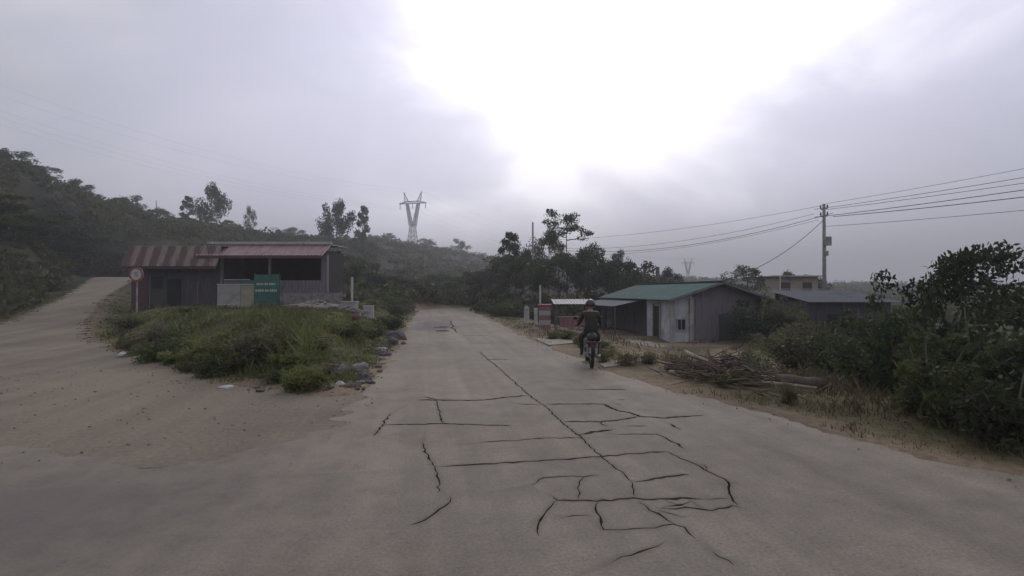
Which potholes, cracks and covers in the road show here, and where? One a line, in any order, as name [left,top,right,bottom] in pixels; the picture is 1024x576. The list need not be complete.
crack [374,353,738,537]
